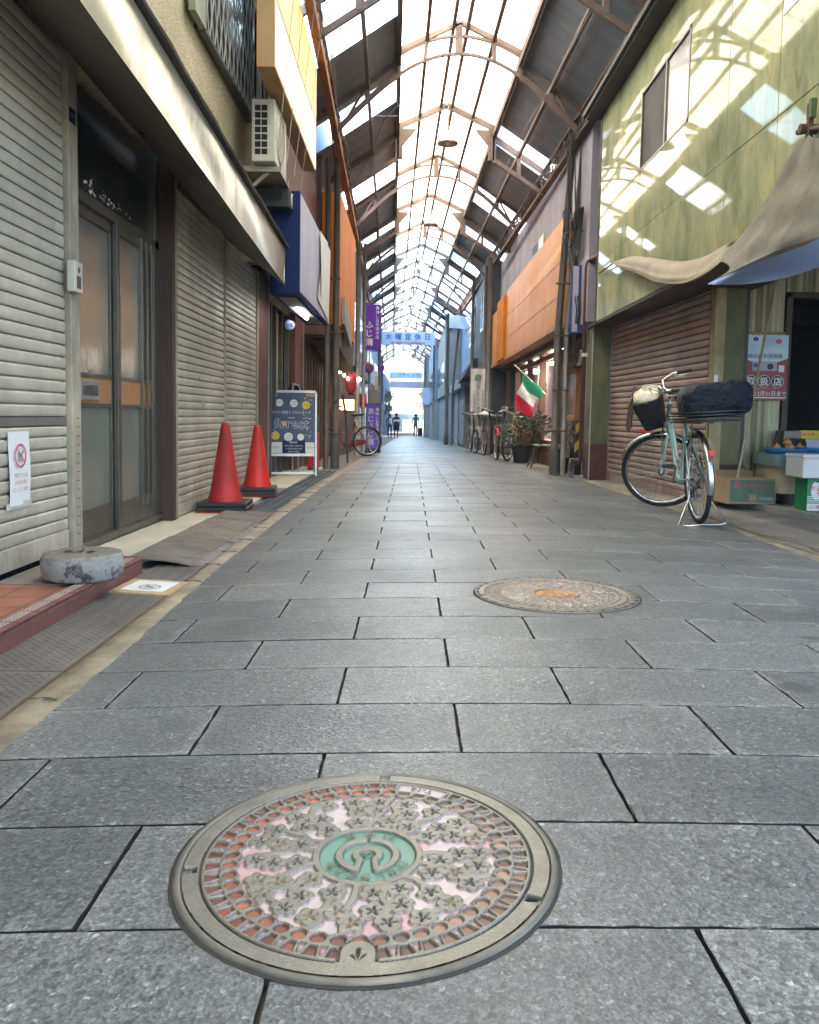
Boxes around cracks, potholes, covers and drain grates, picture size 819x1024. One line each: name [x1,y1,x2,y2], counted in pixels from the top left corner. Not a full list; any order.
manhole cover [473,577,642,615]
manhole cover [167,773,563,990]
